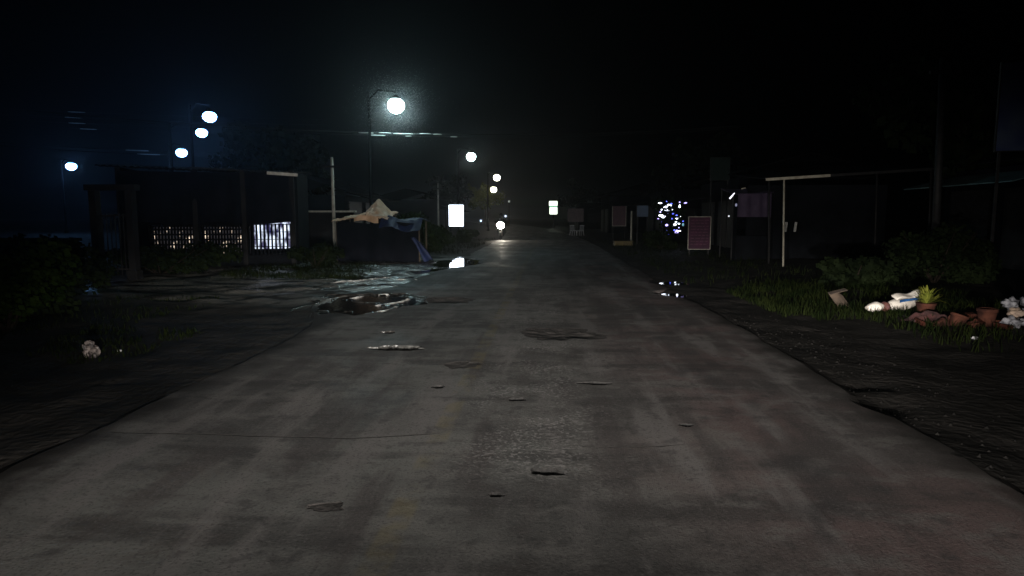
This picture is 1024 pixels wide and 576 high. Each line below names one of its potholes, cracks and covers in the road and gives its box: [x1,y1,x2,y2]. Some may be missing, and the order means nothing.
pothole [306,501,344,512]
pothole [520,328,608,341]
pothole [531,467,565,476]
pothole [290,293,428,316]
pothole [444,361,483,369]
pothole [424,296,476,304]
